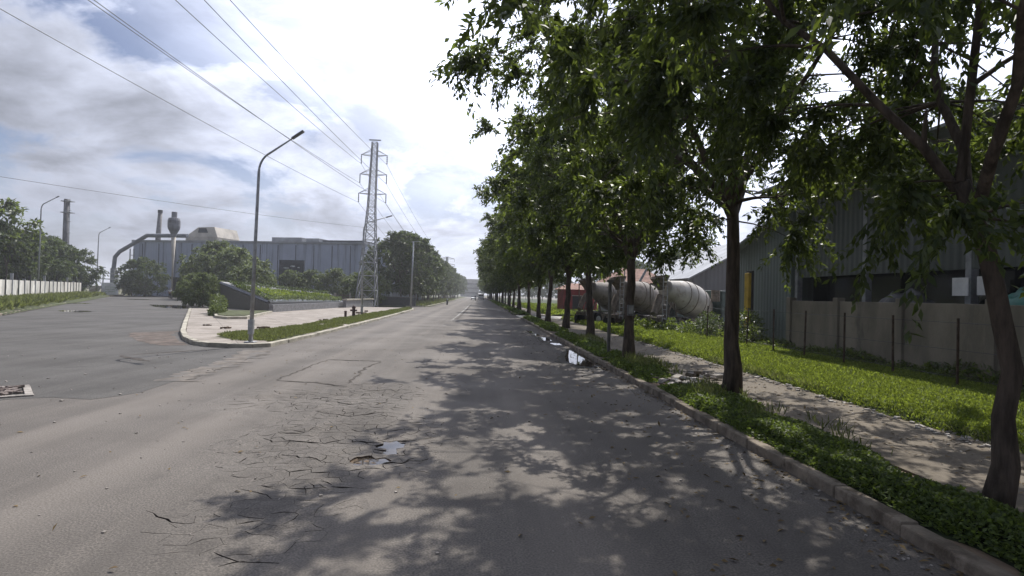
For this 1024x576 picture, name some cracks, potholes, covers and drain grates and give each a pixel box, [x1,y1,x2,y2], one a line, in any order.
crack [143,359,457,567]
pothole [349,455,391,466]
